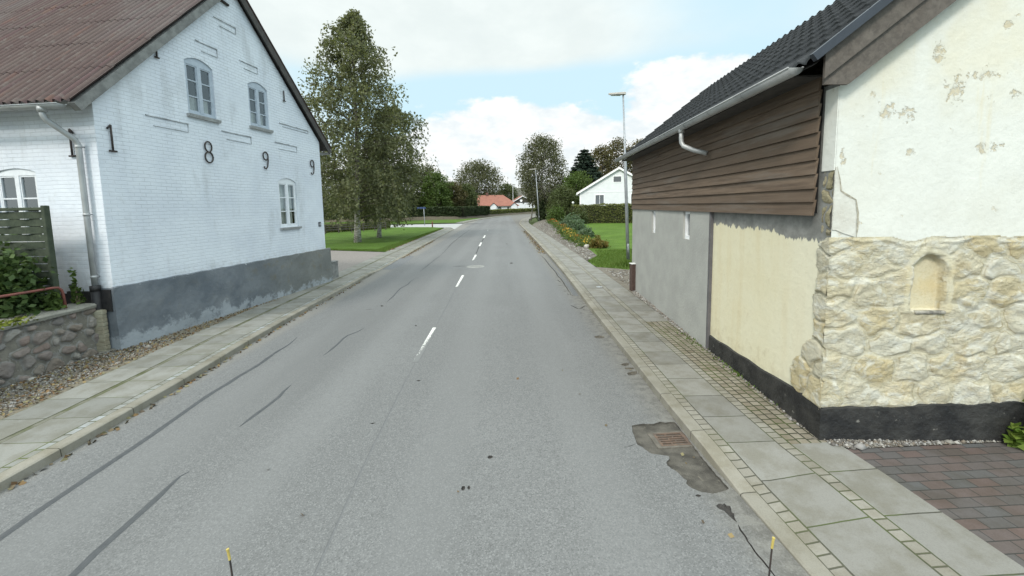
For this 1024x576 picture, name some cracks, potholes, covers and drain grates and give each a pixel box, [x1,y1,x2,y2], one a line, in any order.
crack [738,525,775,576]
drain grate [647,431,693,449]
